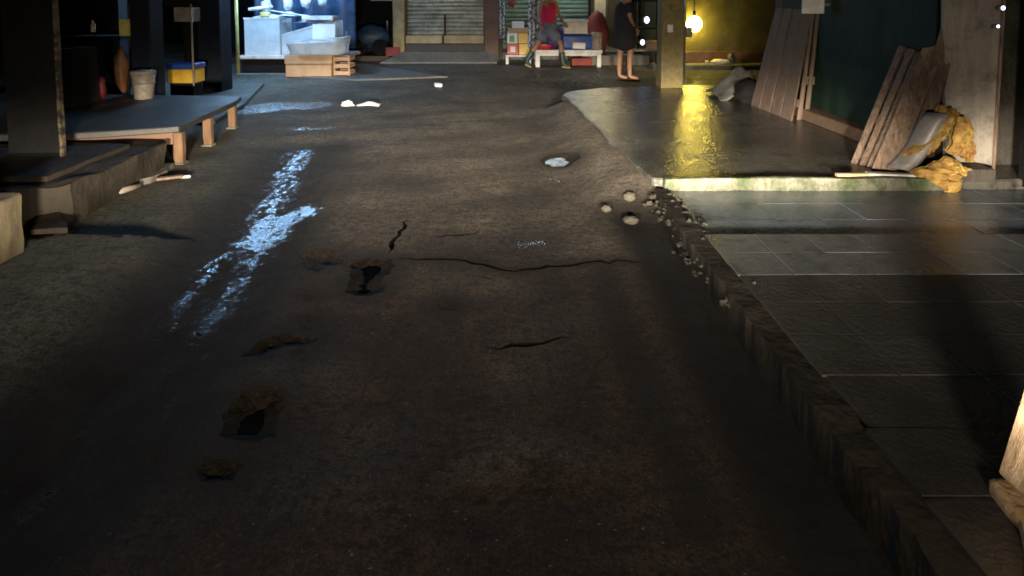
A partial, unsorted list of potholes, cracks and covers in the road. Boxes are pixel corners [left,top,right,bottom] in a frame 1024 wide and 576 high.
crack [389,220,652,281]
pothole [299,249,345,273]
pothole [540,152,582,167]
pothole [218,385,286,442]
pothole [194,459,245,482]
crack [475,321,575,350]
pothole [241,333,318,358]
pothole [345,257,396,296]
